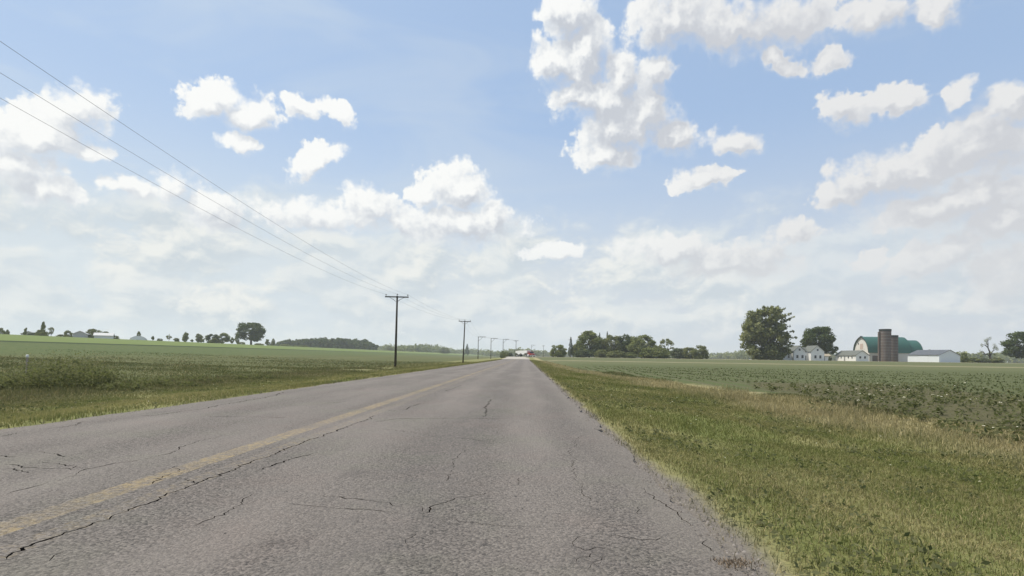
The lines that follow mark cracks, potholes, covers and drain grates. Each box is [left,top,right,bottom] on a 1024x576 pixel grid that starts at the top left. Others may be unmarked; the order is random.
crack [292,496,401,512]
crack [572,481,720,570]
crack [5,416,373,563]
crack [422,494,525,527]
